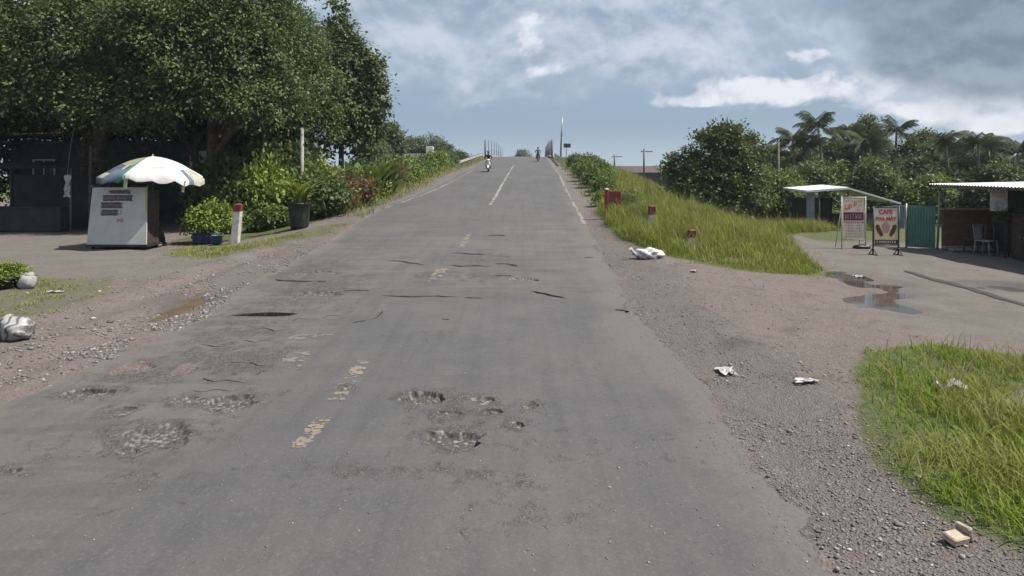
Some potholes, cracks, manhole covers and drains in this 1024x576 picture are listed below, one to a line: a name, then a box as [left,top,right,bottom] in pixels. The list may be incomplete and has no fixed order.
pothole [203,393,259,413]
pothole [420,430,484,448]
crack [193,290,481,392]
pothole [469,396,496,406]
pothole [169,396,209,404]
crack [452,235,563,298]
pothole [397,391,445,406]
pothole [114,419,198,449]
pothole [521,401,540,409]
pothole [56,388,119,398]
